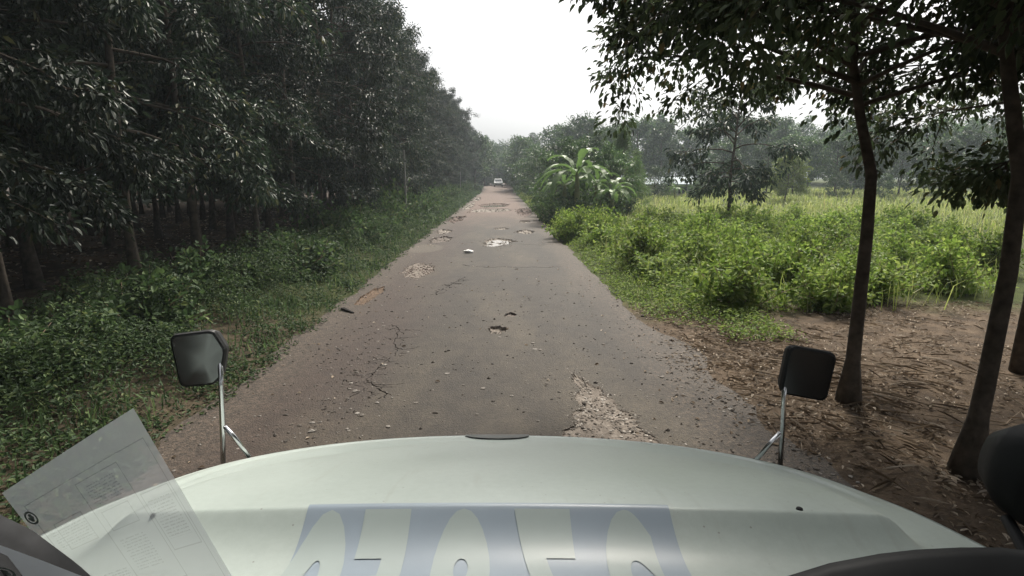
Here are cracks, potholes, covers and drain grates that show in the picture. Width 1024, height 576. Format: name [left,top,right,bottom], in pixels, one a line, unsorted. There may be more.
pothole [397,262,435,280]
crack [430,265,549,295]
pothole [555,367,668,444]
pothole [515,207,532,216]
pothole [488,325,509,334]
pothole [355,286,385,306]
crack [342,324,420,399]
pothole [479,238,519,247]
